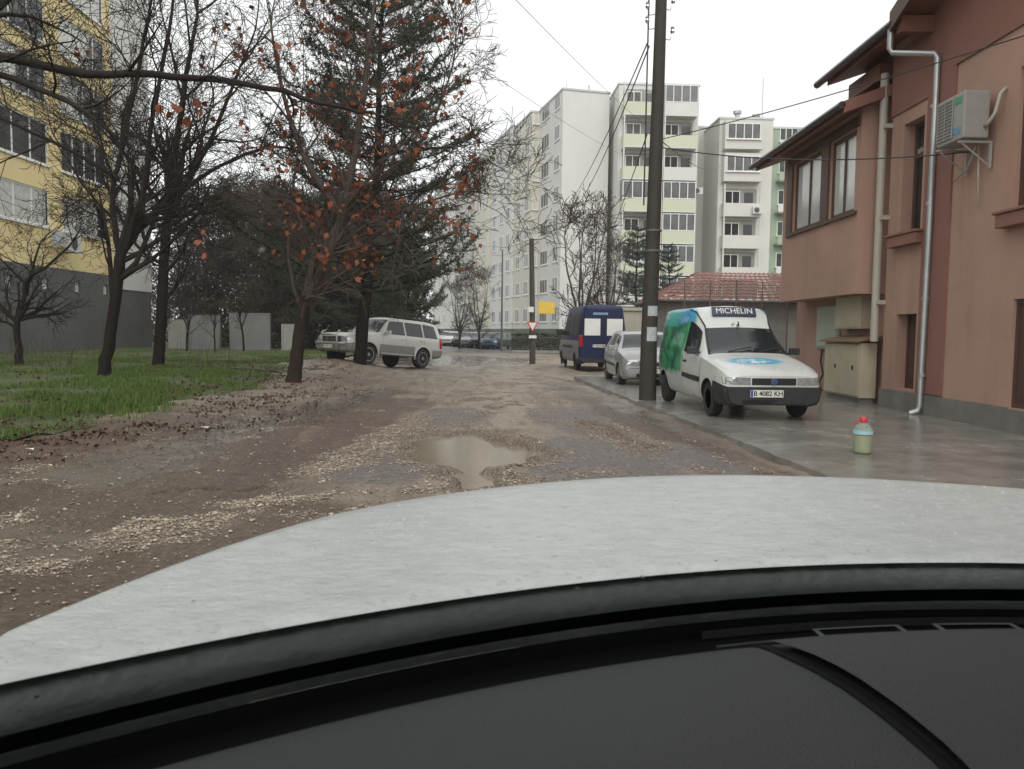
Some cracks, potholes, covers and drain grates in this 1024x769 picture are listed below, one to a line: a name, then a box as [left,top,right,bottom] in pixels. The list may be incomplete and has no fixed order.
pothole [380,429,569,492]
